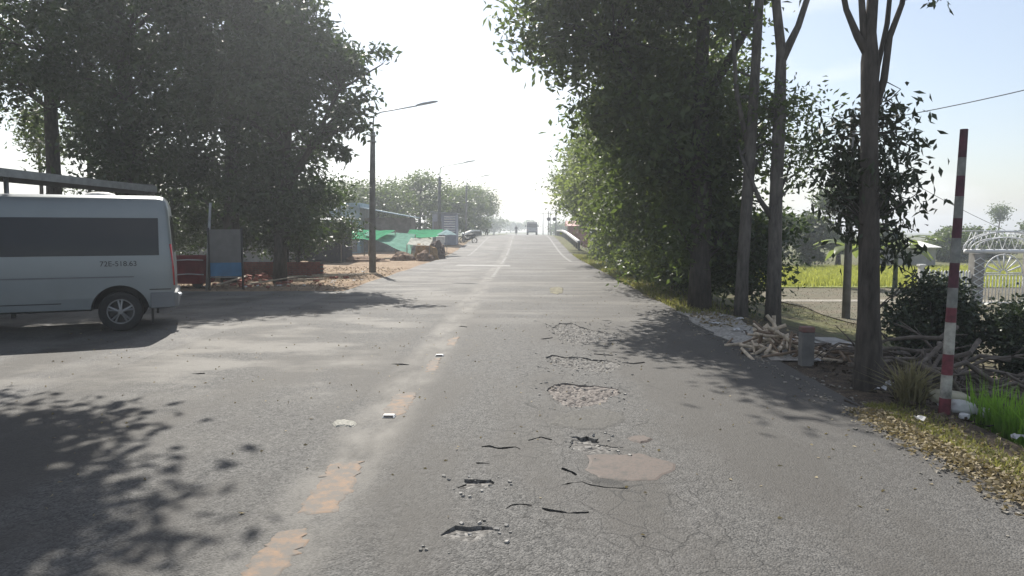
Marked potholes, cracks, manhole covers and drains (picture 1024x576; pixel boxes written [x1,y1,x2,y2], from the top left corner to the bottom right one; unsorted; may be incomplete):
pothole [441,525,494,542]
pothole [569,436,619,453]
pothole [546,355,621,372]
crack [506,504,589,514]
pothole [547,383,621,408]
pothole [457,479,494,489]
crack [561,467,626,489]
crack [476,437,552,464]
pothole [552,323,618,345]
